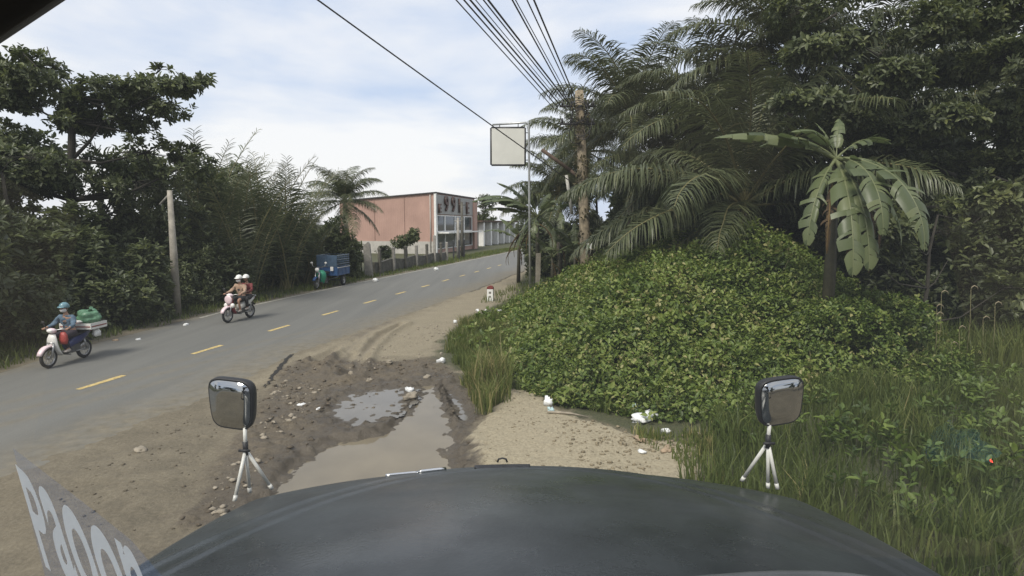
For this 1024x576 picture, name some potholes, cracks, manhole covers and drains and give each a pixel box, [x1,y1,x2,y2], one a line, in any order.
pothole [439,377,479,426]
crack [263,354,294,387]
pothole [234,376,472,509]
